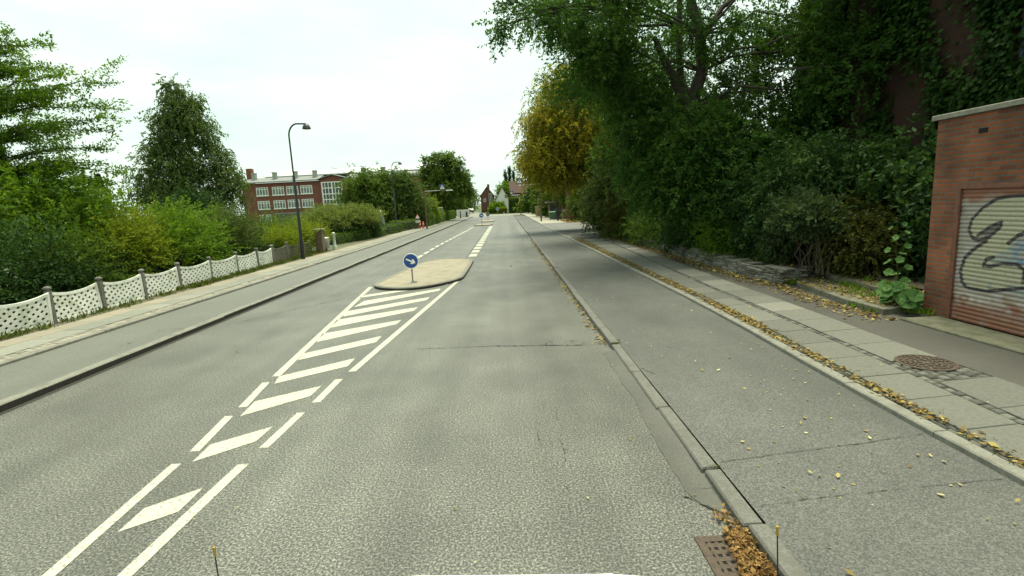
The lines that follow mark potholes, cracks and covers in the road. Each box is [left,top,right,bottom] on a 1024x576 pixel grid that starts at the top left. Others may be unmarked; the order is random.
drain grate [694,535,774,576]
manhole cover [894,354,960,372]
